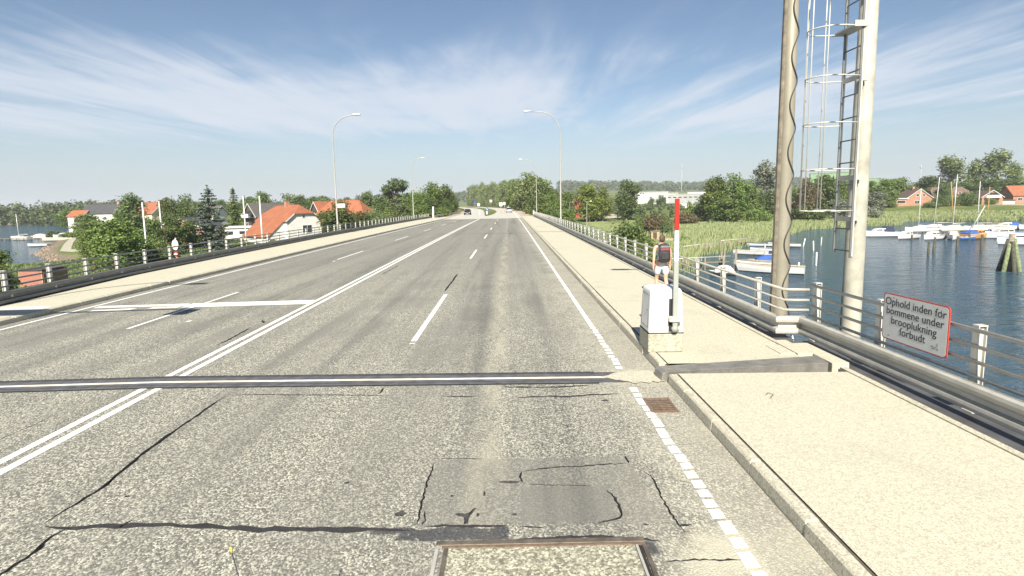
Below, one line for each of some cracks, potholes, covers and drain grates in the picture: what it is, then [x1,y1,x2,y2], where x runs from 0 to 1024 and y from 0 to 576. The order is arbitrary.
crack [506,385,610,398]
drain grate [642,398,680,413]
crack [0,456,692,576]
